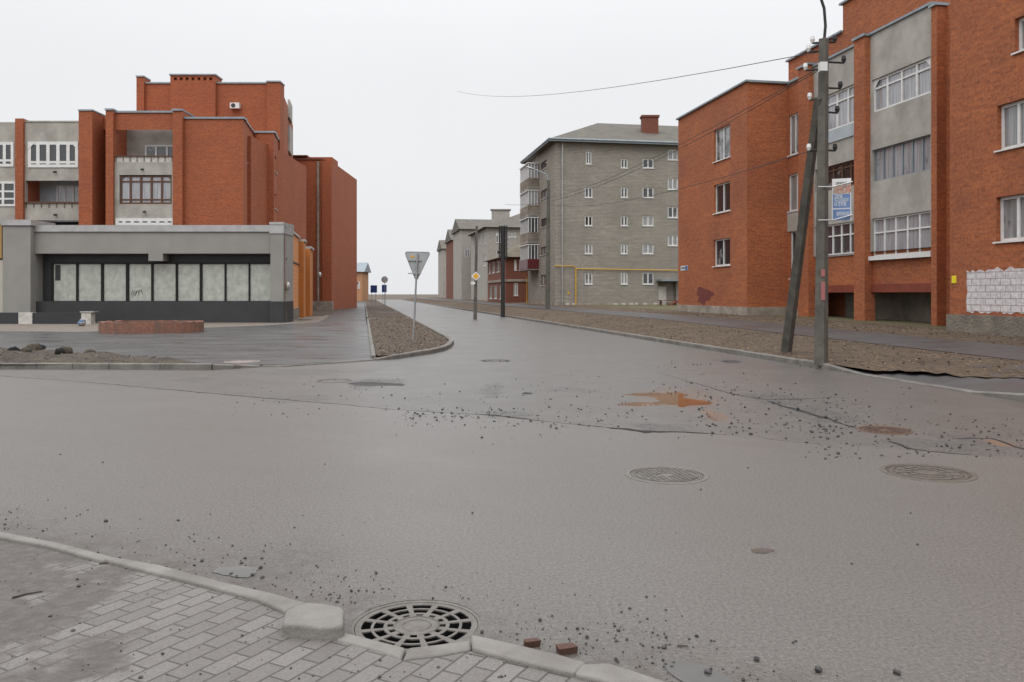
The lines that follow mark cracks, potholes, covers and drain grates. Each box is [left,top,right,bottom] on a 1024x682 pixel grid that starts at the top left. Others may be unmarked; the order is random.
crack [888,438,1024,455]
crack [658,372,856,428]
manhole cover [879,463,978,483]
manhole cover [625,466,709,484]
drain grate [351,600,481,651]
manhole cover [856,426,914,435]
